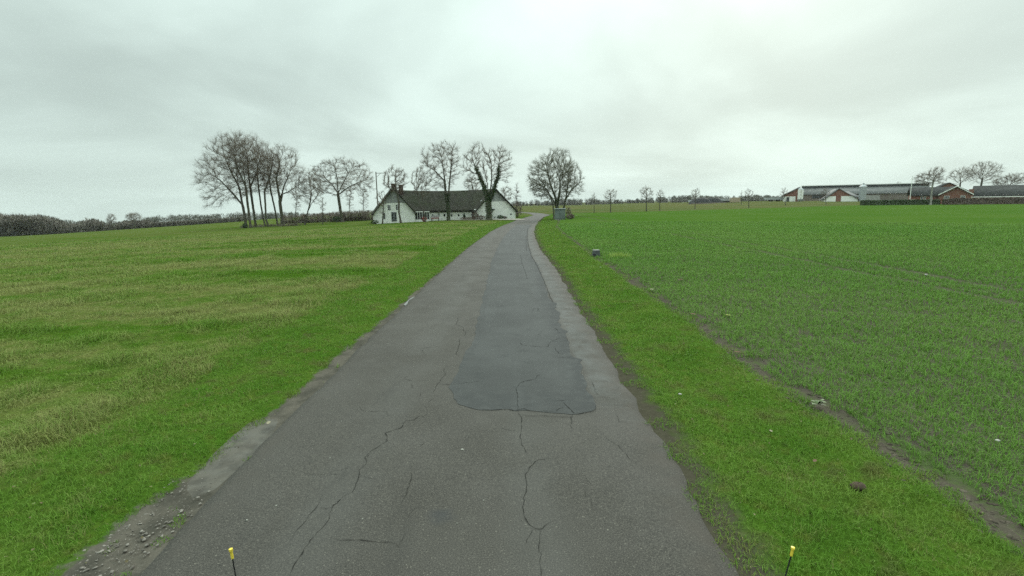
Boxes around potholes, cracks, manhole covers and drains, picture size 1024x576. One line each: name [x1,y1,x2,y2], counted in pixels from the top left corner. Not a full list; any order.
crack [291,413,428,572]
crack [487,374,596,575]
